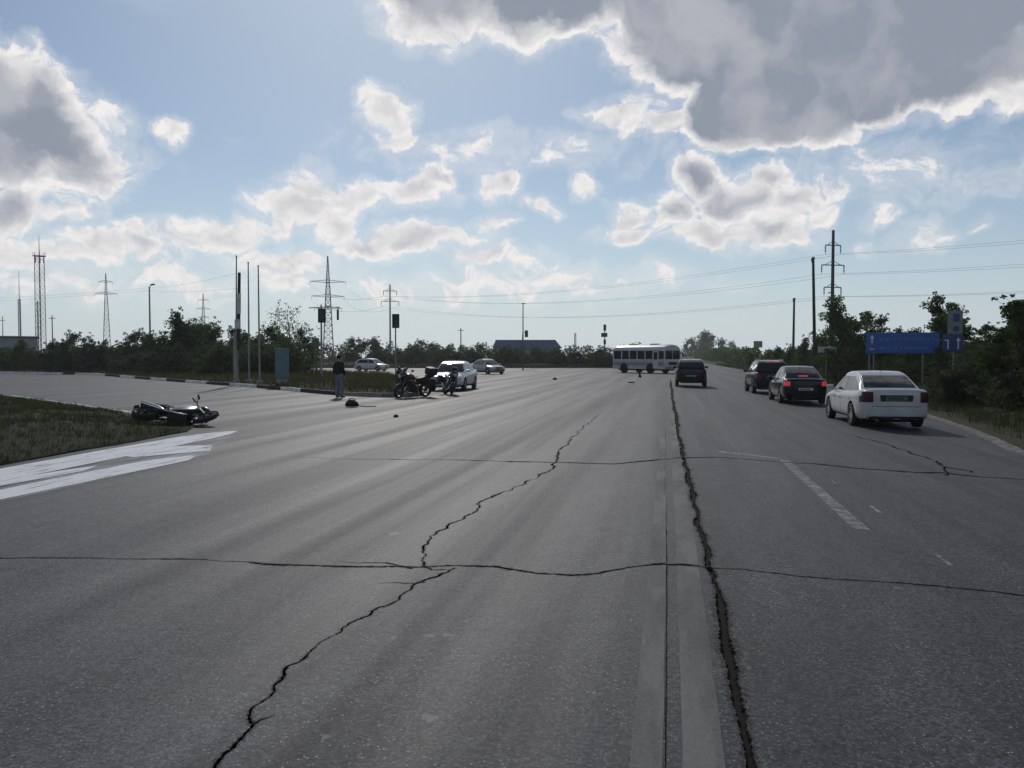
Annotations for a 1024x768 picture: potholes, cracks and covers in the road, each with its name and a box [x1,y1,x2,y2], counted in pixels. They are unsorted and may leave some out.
crack [0,379,1024,768]
